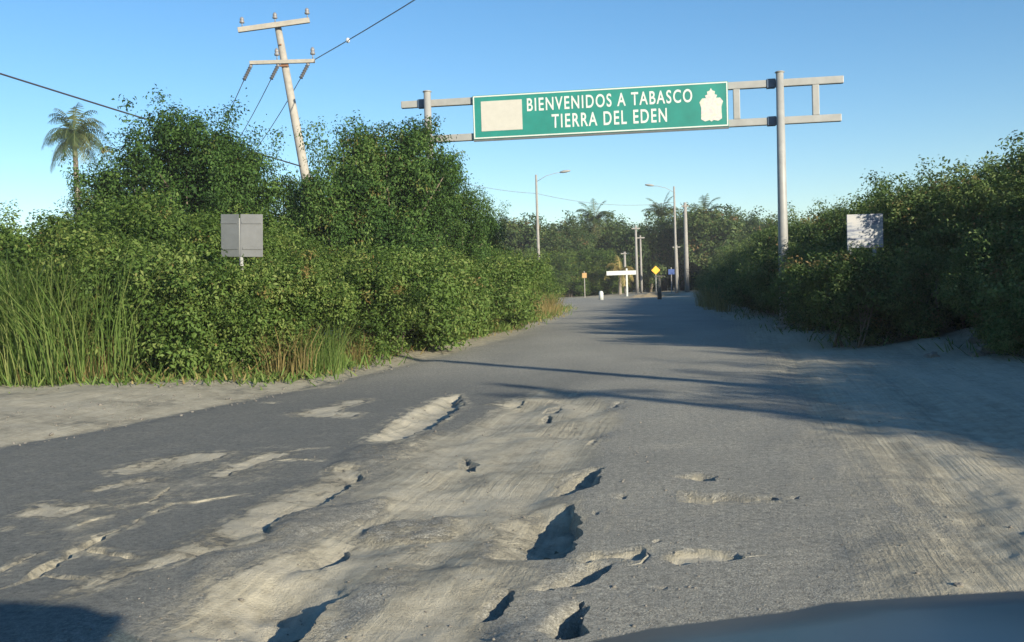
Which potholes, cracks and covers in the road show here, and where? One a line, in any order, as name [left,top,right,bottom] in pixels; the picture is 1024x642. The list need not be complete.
pothole [0,290,1024,642]
